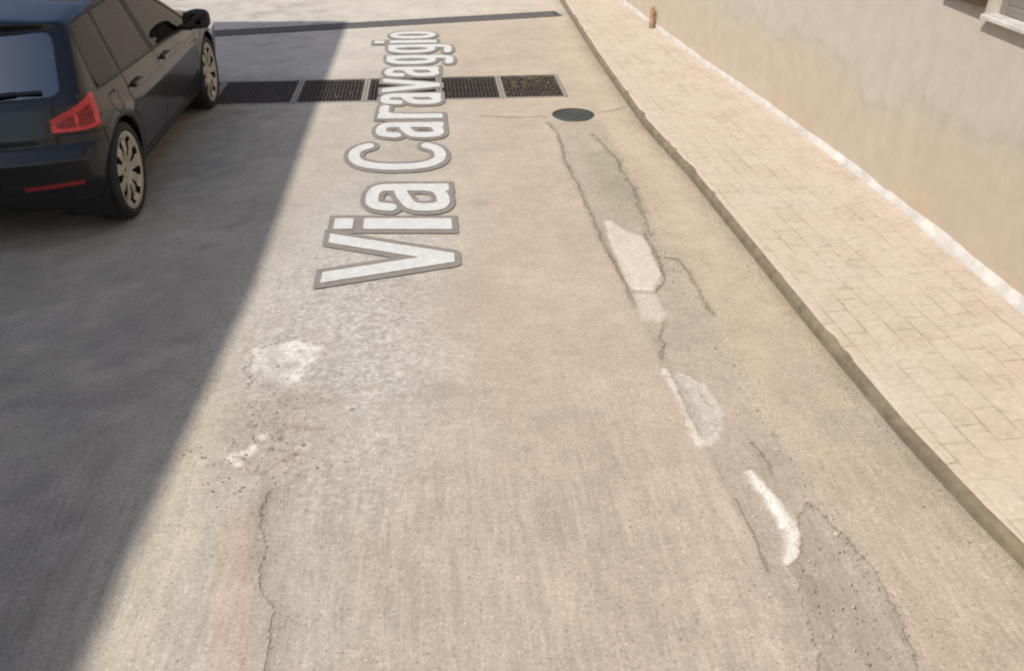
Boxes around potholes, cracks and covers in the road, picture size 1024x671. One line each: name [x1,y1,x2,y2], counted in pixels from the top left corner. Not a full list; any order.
drain grate [293,78,368,104]
drain grate [364,77,439,102]
manhole cover [552,108,594,122]
crack [735,499,770,573]
drain grate [497,74,567,99]
crack [480,115,653,308]
crack [657,257,716,360]
drain grate [439,75,503,100]
crack [750,442,773,473]
drain grate [216,80,303,105]
crack [258,490,277,671]
